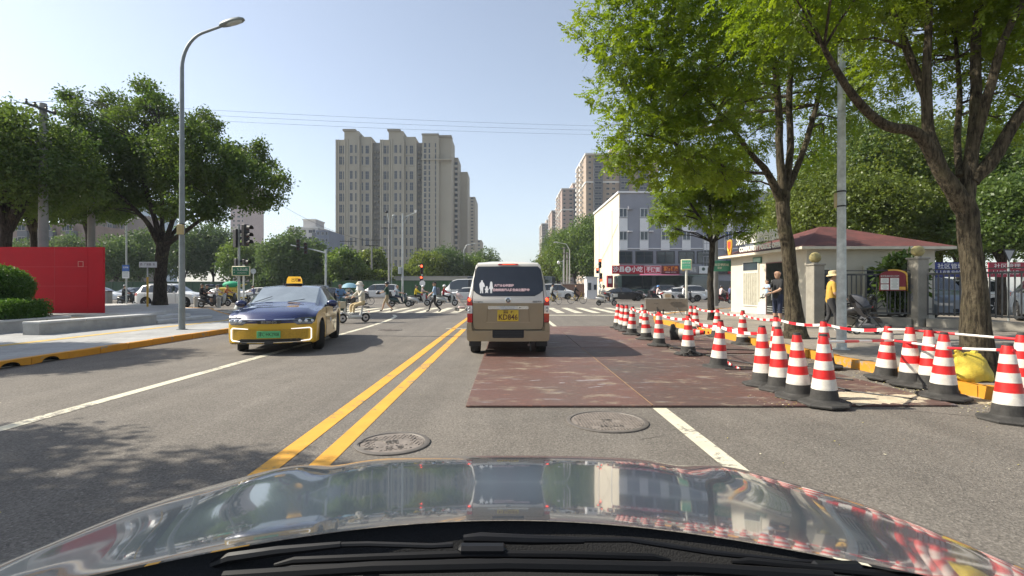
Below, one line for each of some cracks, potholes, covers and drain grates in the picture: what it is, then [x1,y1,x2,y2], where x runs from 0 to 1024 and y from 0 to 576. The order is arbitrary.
manhole cover [566,411,649,434]
manhole cover [354,432,430,456]
